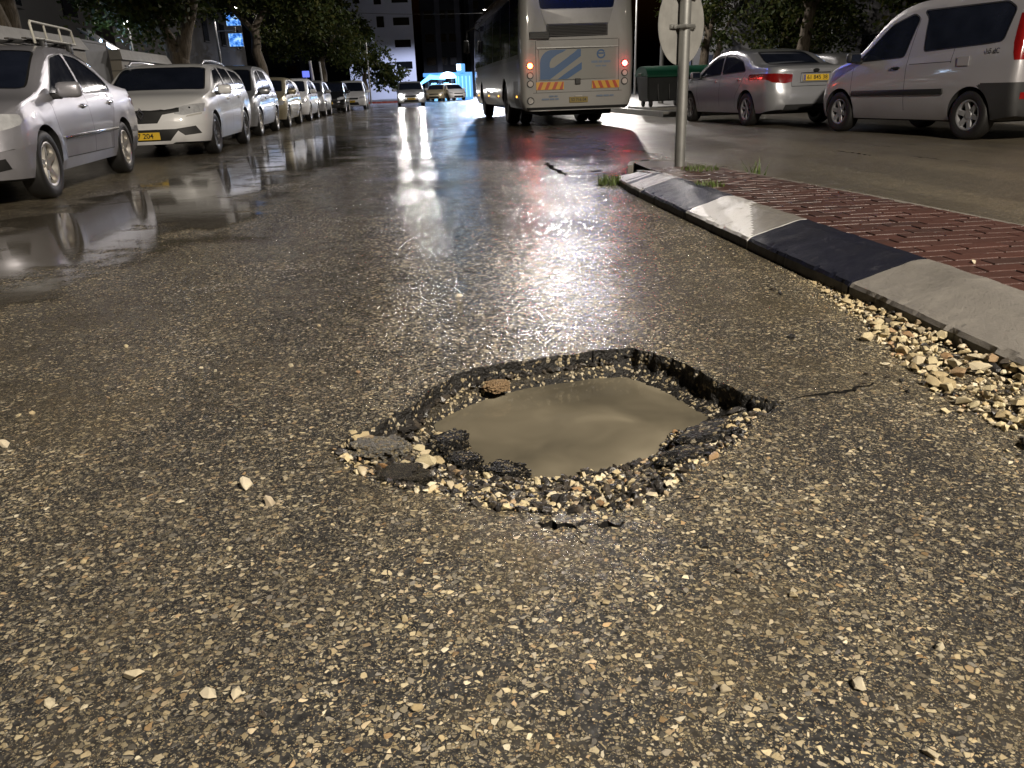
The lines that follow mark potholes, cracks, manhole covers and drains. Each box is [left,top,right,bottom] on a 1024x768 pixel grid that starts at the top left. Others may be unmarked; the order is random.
crack [525,130,606,176]
pothole [330,348,780,514]
crack [790,381,879,399]
